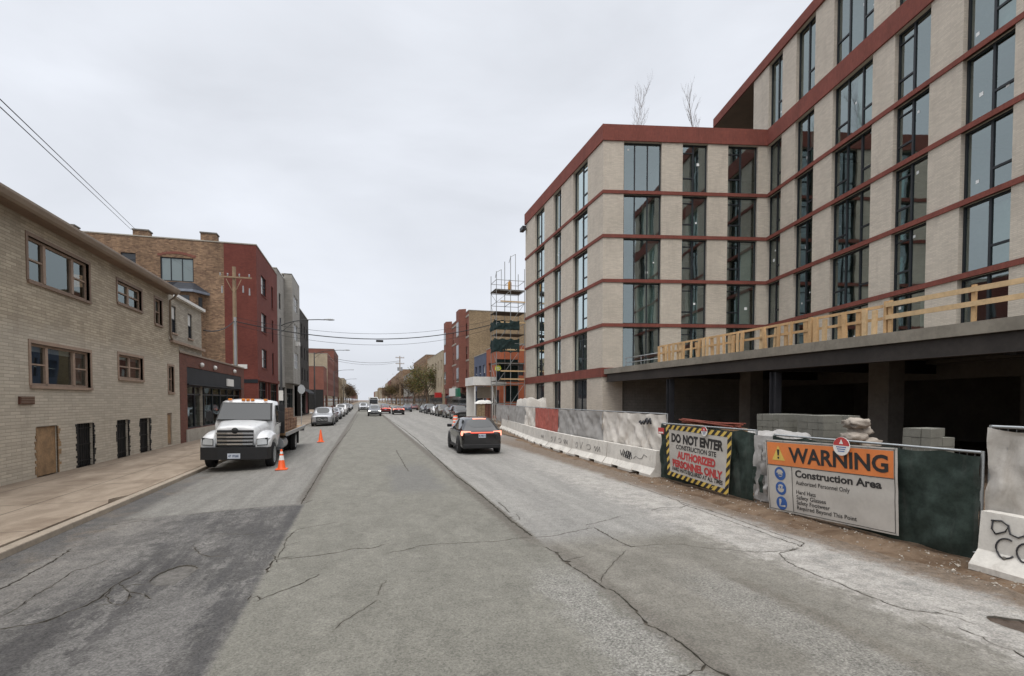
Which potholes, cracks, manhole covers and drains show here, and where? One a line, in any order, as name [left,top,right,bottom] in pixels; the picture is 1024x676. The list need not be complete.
crack [0,550,150,629]
crack [630,484,967,629]
crack [545,547,730,676]
crack [247,522,526,602]
